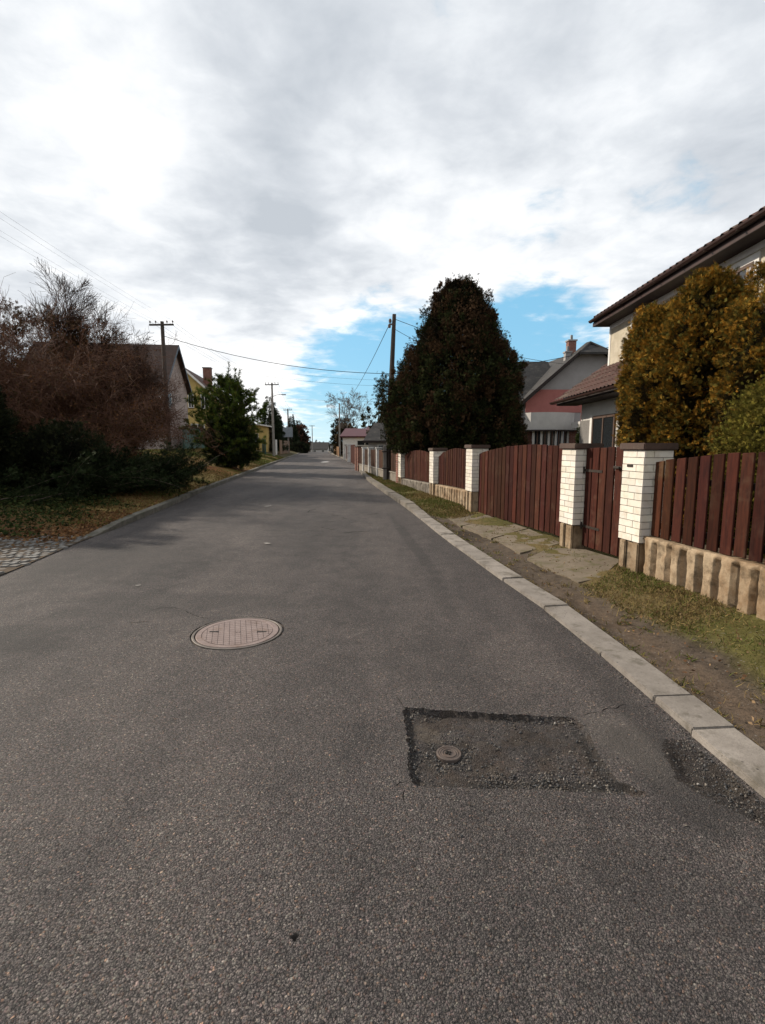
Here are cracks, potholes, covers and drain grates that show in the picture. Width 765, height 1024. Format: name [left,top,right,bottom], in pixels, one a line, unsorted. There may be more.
pothole [402,707,649,798]
pothole [661,738,765,826]
manhole cover [436,746,461,764]
manhole cover [190,617,284,650]
